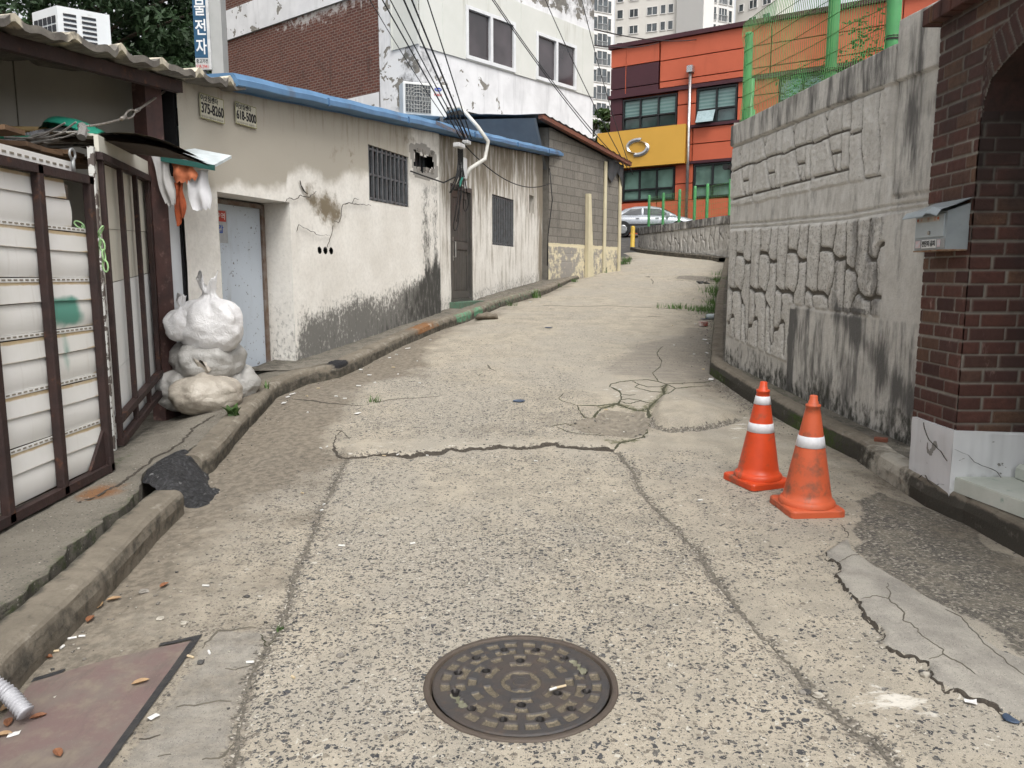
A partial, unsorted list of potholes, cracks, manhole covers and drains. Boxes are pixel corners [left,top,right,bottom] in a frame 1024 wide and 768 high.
crack [824,524,1024,726]
manhole cover [423,635,619,743]
crack [332,347,711,459]
crack [202,626,274,670]
crack [78,415,215,503]
